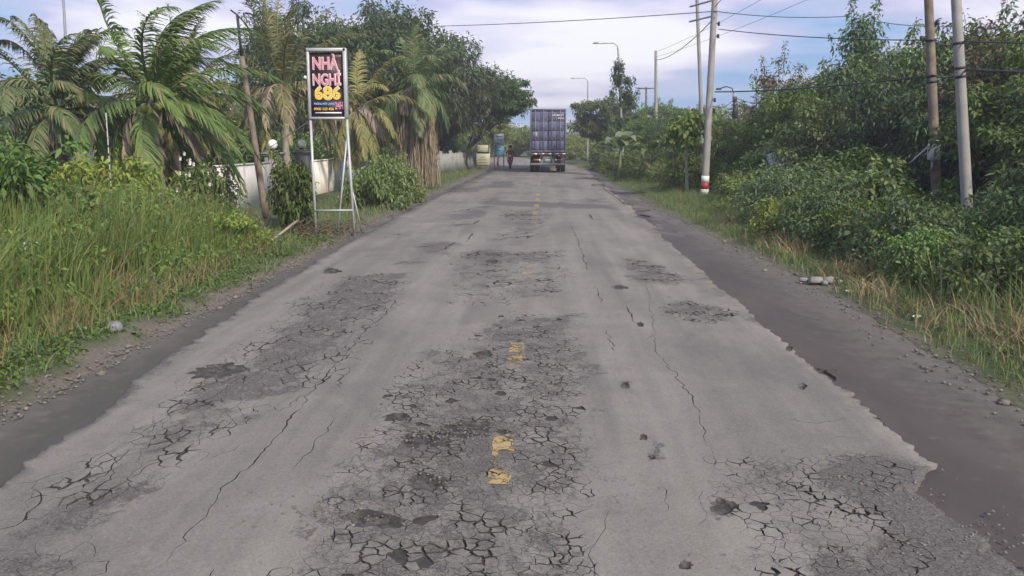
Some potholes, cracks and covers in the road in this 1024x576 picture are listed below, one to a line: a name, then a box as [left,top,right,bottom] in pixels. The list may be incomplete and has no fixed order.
pothole [185,362,251,379]
crack [703,446,936,576]
pothole [338,509,407,529]
crack [400,188,650,306]
crack [2,272,411,574]
crack [266,310,608,576]
pothole [709,497,737,516]
crack [623,257,685,284]
